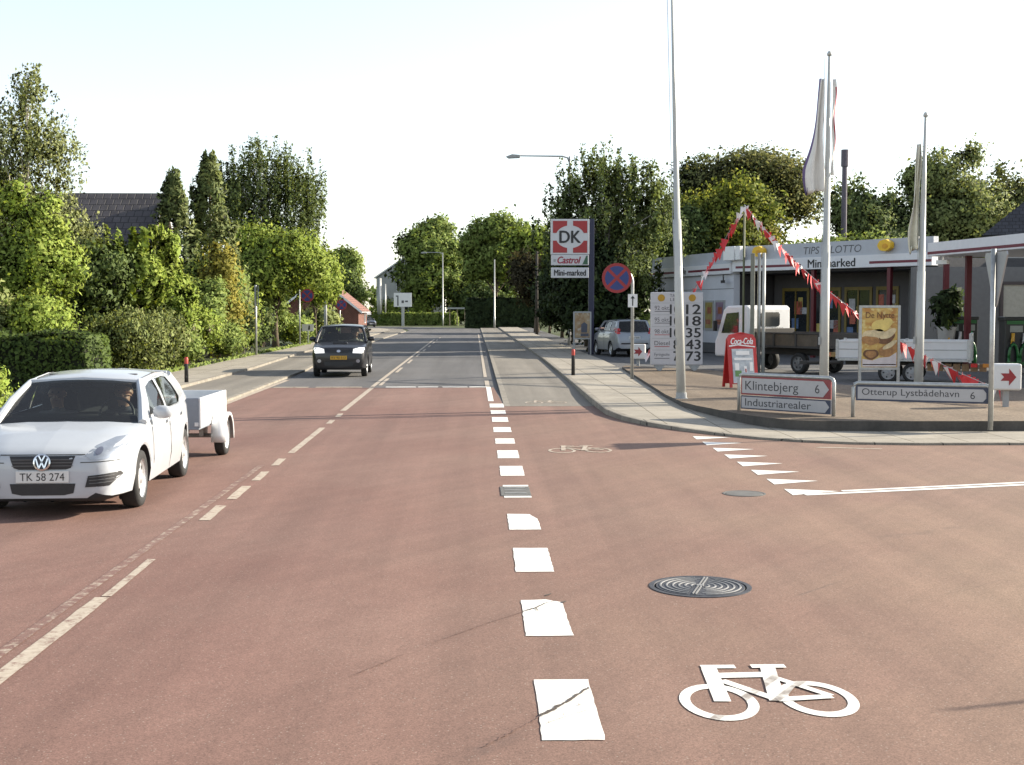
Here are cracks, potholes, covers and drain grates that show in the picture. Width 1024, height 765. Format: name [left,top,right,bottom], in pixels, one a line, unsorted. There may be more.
manhole cover [649,576,752,598]
crack [348,593,566,677]
crack [482,687,592,747]
